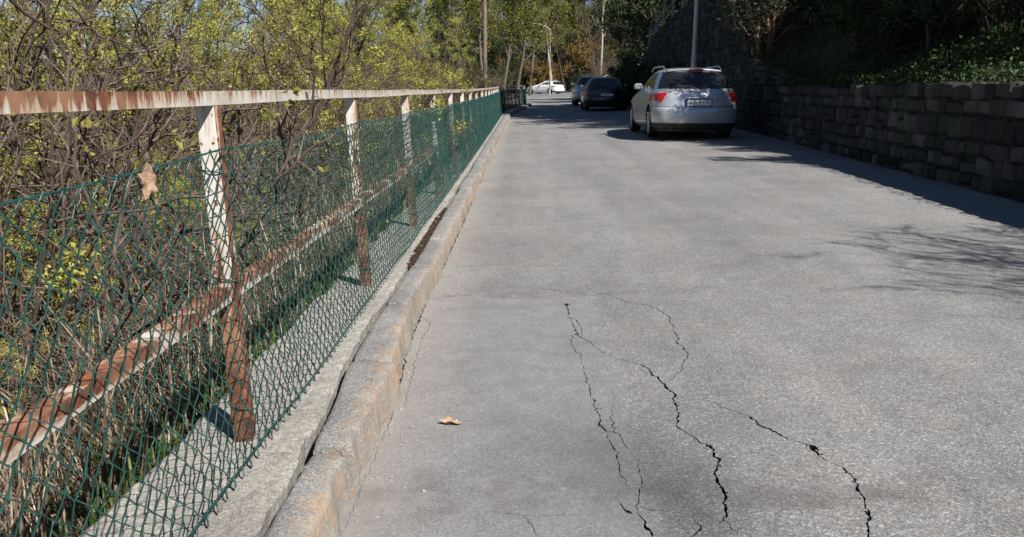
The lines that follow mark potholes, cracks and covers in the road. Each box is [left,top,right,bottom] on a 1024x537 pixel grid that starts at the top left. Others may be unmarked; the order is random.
crack [551,289,872,537]
